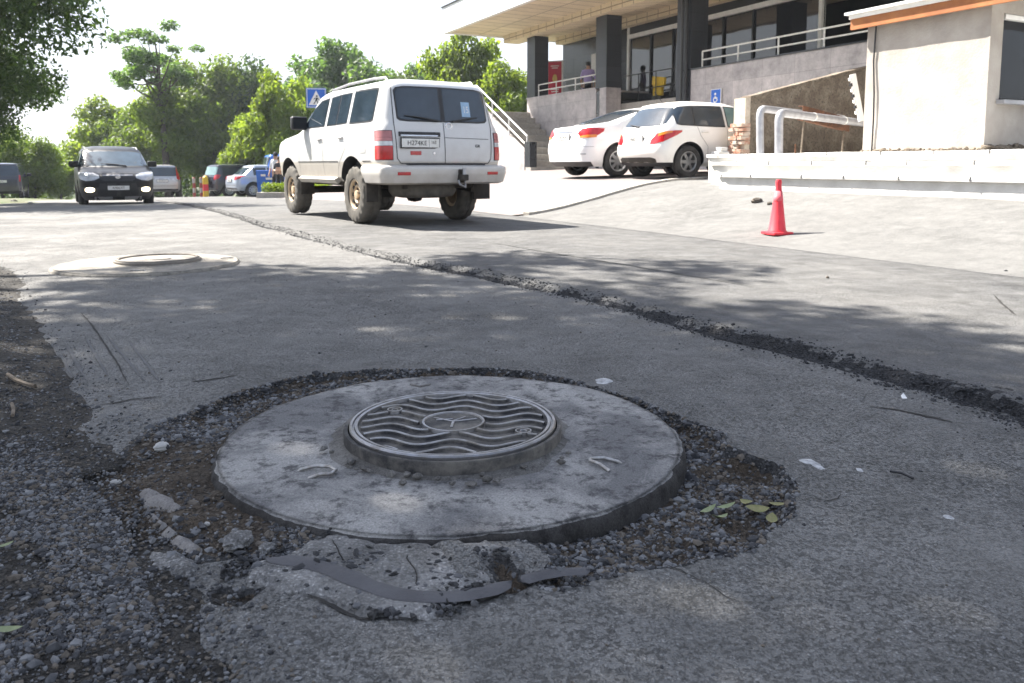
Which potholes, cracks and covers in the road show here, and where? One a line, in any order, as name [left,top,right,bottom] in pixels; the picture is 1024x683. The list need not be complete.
crack [308,594,426,621]
crack [457,591,506,604]
crack [82,313,160,405]
manhole cover [349,391,556,461]
manhole cover [115,253,199,263]
pothole [62,368,798,592]
pothole [206,586,266,607]
